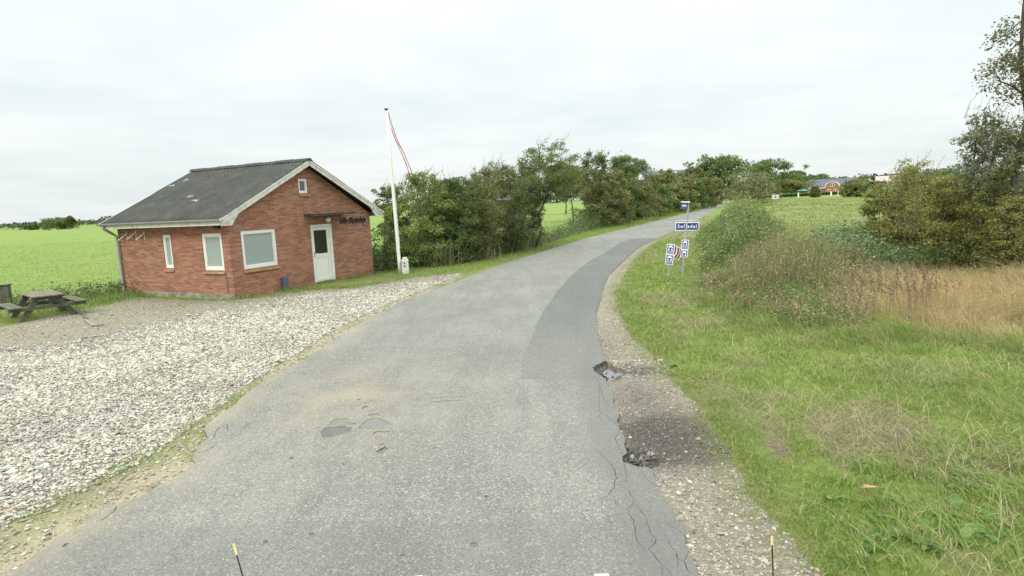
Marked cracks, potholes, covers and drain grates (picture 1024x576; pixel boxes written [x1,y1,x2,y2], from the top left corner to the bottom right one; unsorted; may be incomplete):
pothole [592,361,626,381]
pothole [359,418,392,429]
pothole [327,418,356,426]
pothole [320,426,352,438]
pothole [622,444,660,469]
crack [597,379,696,576]
